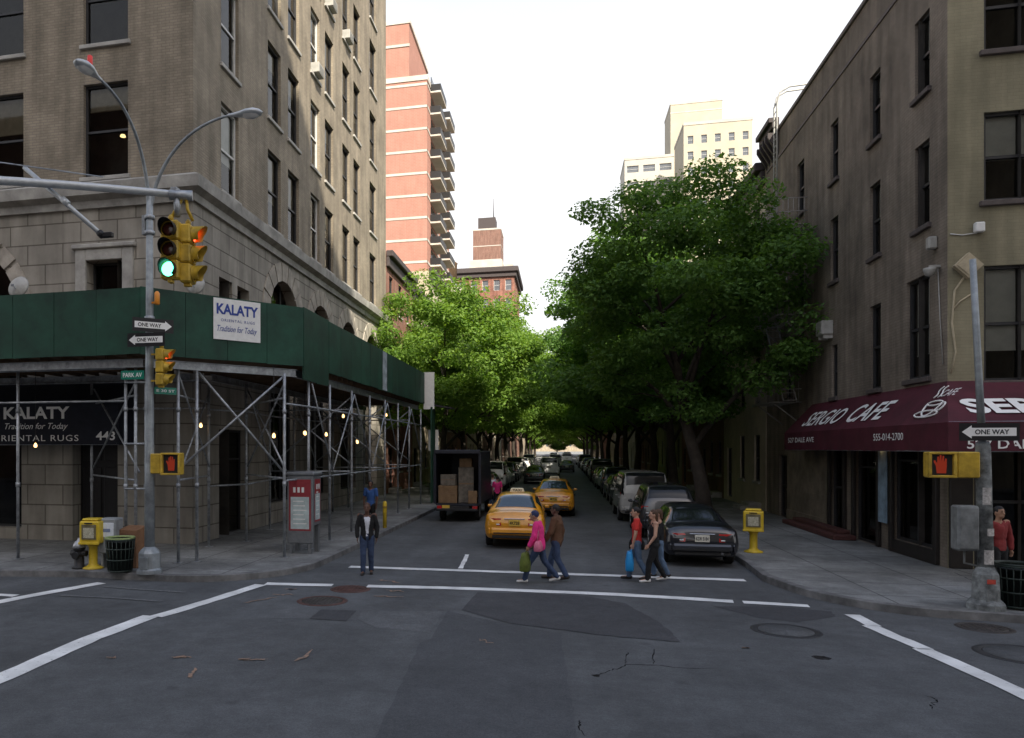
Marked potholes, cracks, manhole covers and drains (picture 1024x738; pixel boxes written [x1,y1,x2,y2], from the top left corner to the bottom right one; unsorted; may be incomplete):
manhole cover [954,622,1017,634]
manhole cover [297,596,348,606]
manhole cover [330,585,371,593]
manhole cover [971,644,1024,664]
crack [592,651,715,677]
manhole cover [750,623,823,639]
